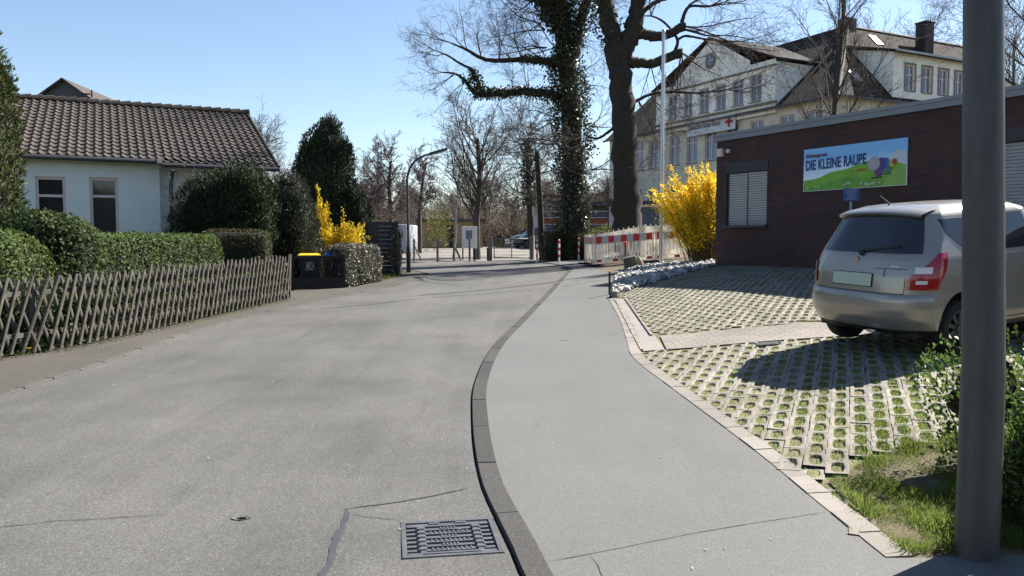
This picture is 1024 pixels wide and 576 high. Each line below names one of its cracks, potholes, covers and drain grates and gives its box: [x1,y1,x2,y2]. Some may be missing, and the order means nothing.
crack [0,514,166,527]
drain grate [401,517,504,559]
